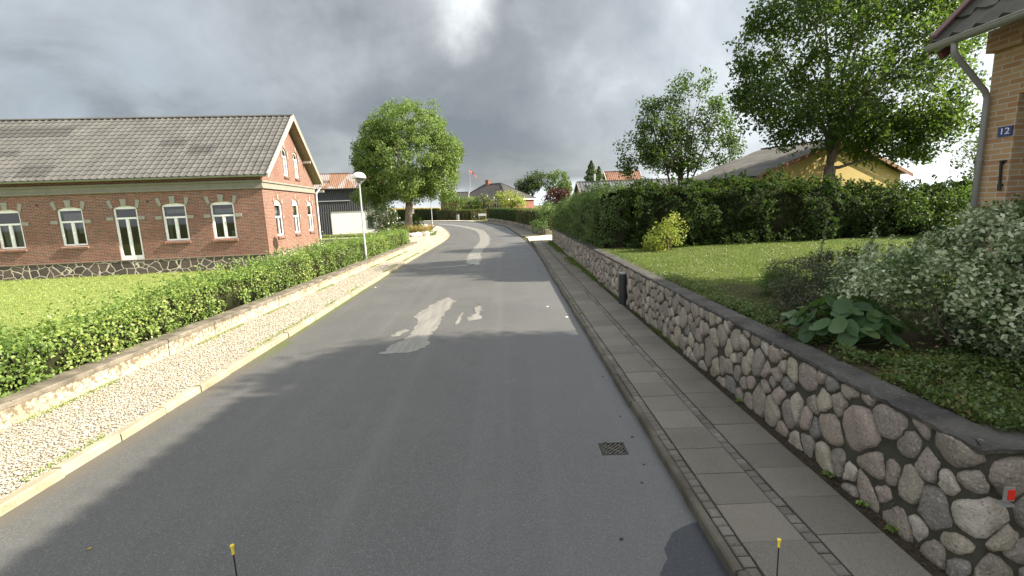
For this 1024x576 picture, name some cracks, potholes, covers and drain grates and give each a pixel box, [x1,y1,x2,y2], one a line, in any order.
drain grate [598,442,629,455]
